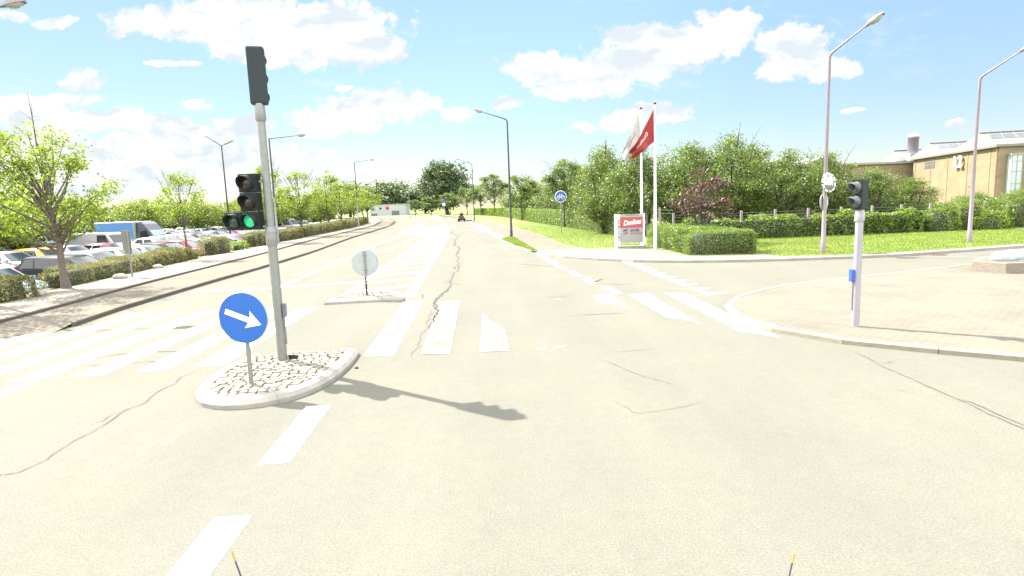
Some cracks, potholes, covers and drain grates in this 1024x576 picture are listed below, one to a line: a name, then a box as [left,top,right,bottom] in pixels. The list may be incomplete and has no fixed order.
crack [0,370,196,475]
crack [411,230,461,355]
